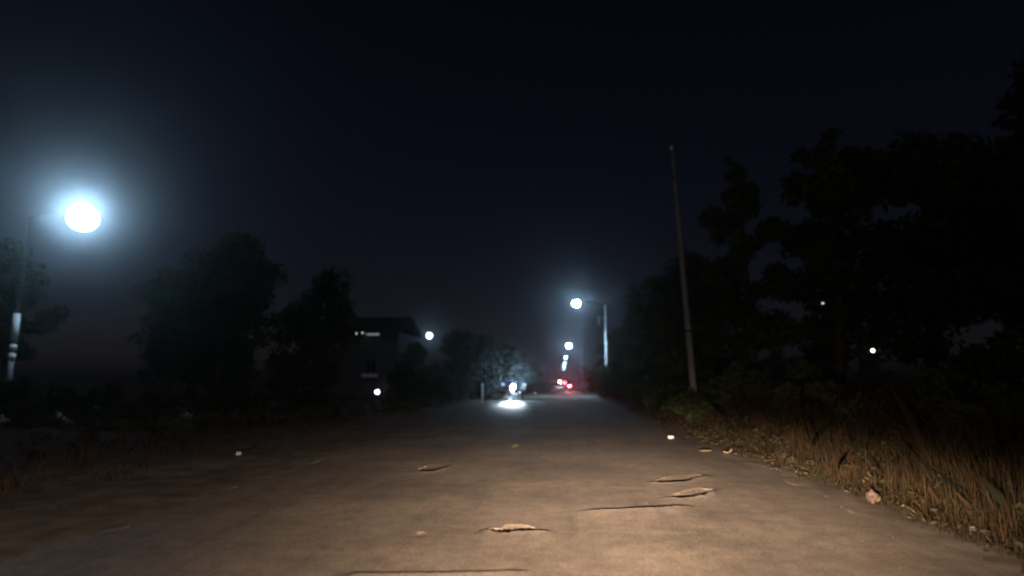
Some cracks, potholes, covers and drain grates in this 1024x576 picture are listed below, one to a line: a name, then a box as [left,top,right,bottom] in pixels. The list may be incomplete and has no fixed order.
pothole [654,474,703,482]
pothole [416,463,452,471]
pothole [487,524,542,533]
pothole [672,487,714,498]
